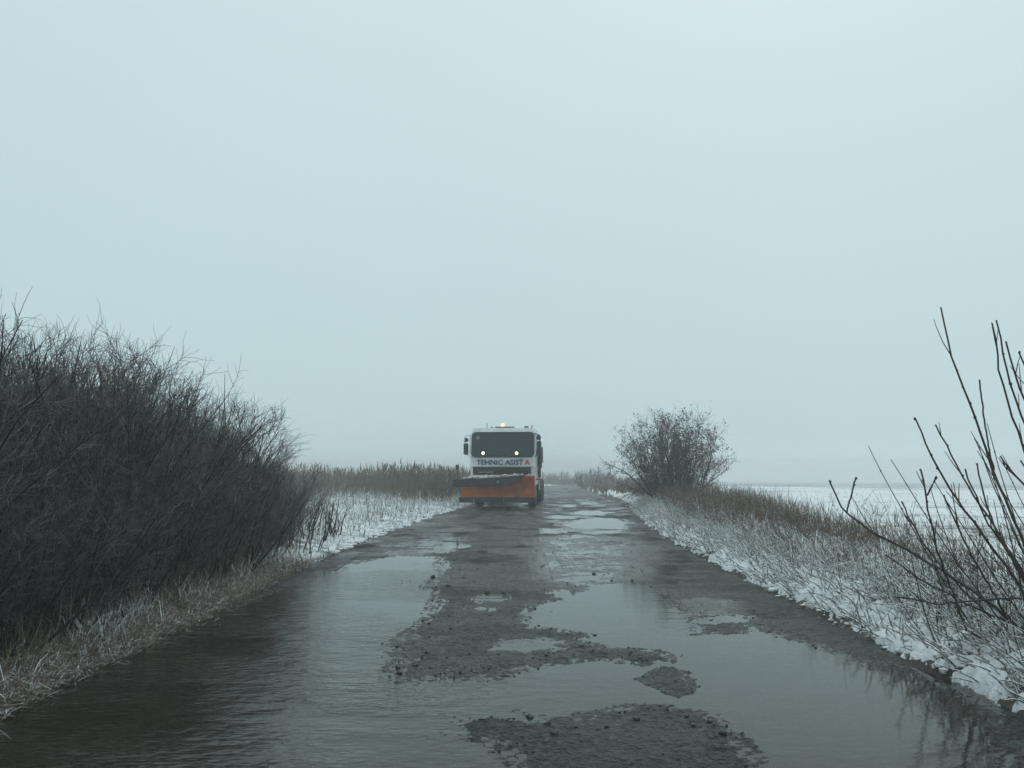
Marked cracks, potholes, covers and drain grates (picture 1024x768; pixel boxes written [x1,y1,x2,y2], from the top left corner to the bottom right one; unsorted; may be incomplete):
pothole [554,517,637,530]
